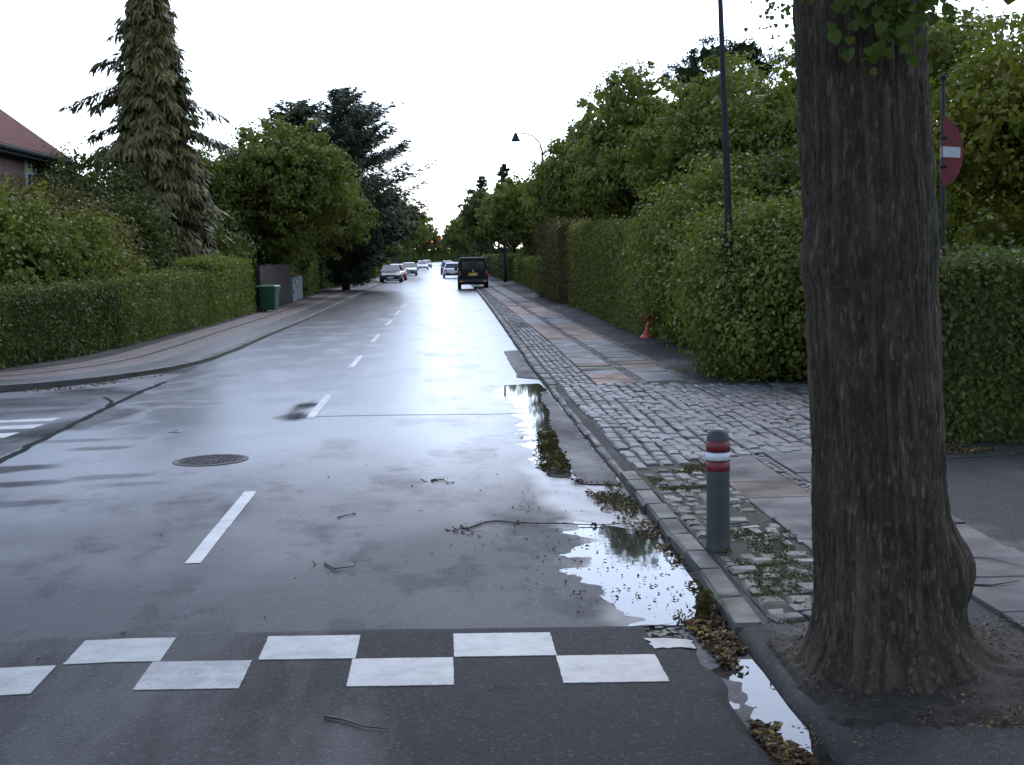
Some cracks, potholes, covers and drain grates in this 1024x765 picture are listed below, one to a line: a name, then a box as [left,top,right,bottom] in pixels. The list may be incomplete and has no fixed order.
manhole cover [172,454,249,467]
